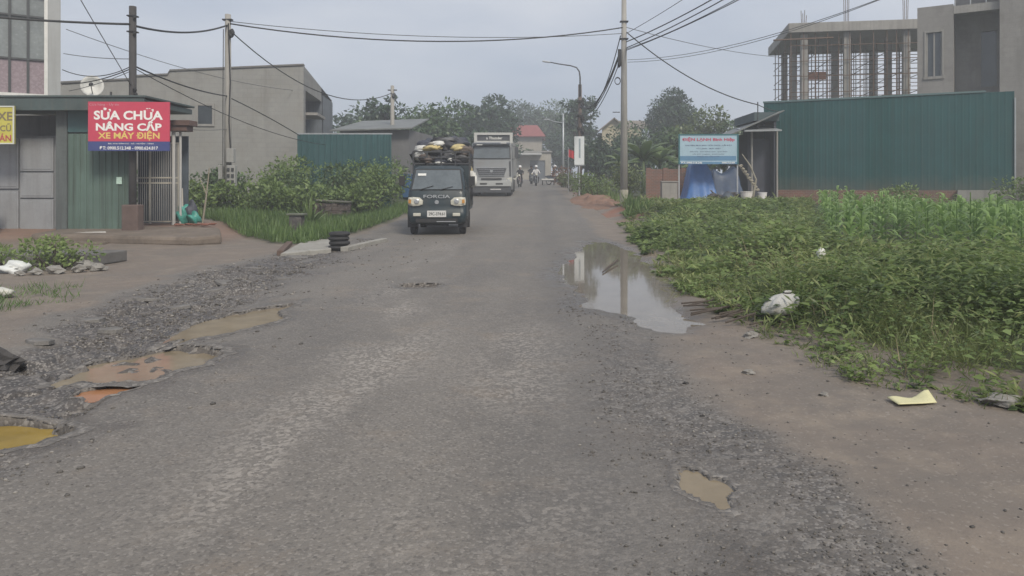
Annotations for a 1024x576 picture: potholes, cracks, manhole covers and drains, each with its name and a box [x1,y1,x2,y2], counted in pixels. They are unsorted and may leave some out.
pothole [0,412,95,454]
pothole [145,300,303,350]
pothole [667,461,746,519]
pothole [63,380,148,409]
pothole [32,342,237,393]
